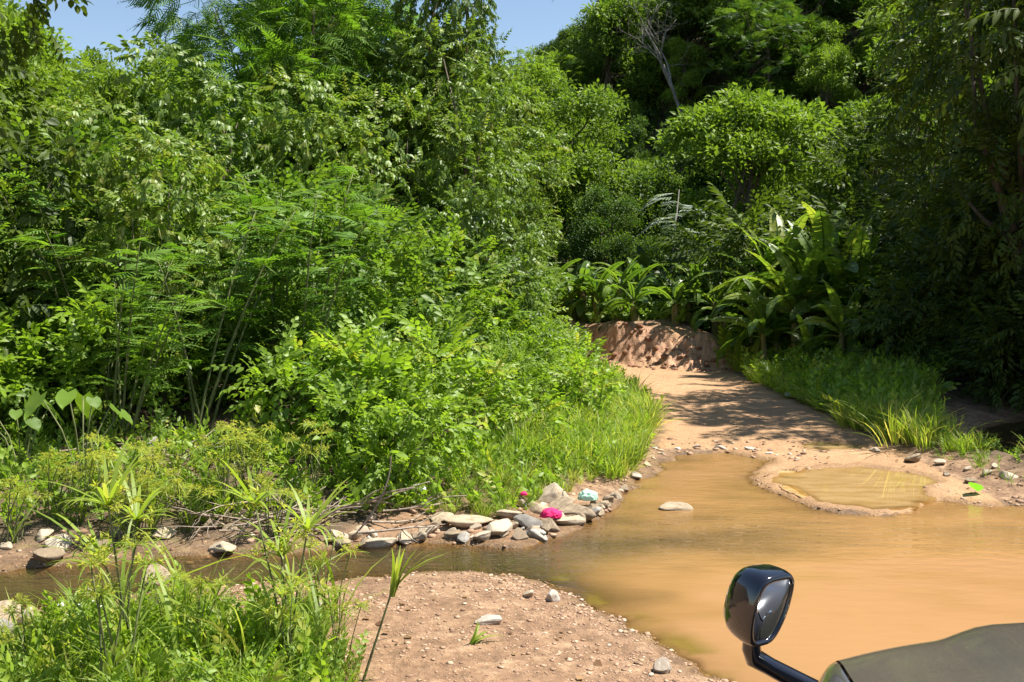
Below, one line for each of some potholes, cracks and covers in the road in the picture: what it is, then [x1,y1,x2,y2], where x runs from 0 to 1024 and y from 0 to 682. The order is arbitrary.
pothole [759,462,951,517]
